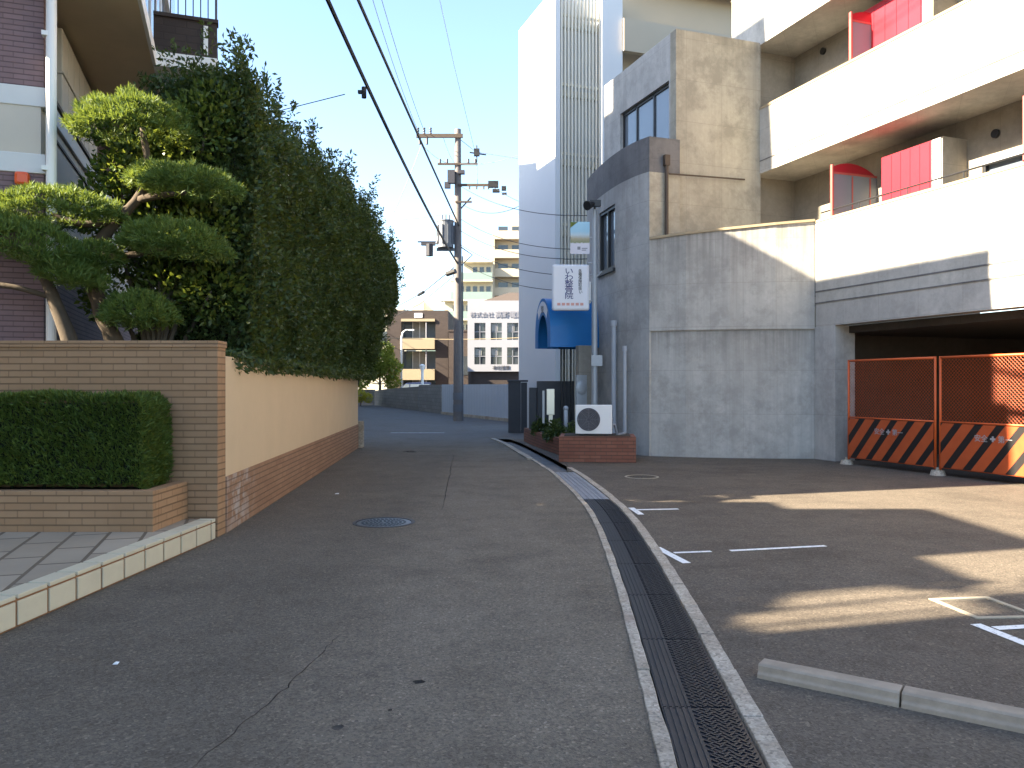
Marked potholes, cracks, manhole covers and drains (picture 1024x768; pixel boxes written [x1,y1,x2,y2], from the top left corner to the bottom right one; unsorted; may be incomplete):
crack [192,637,337,768]
manhole cover [353,517,415,528]
